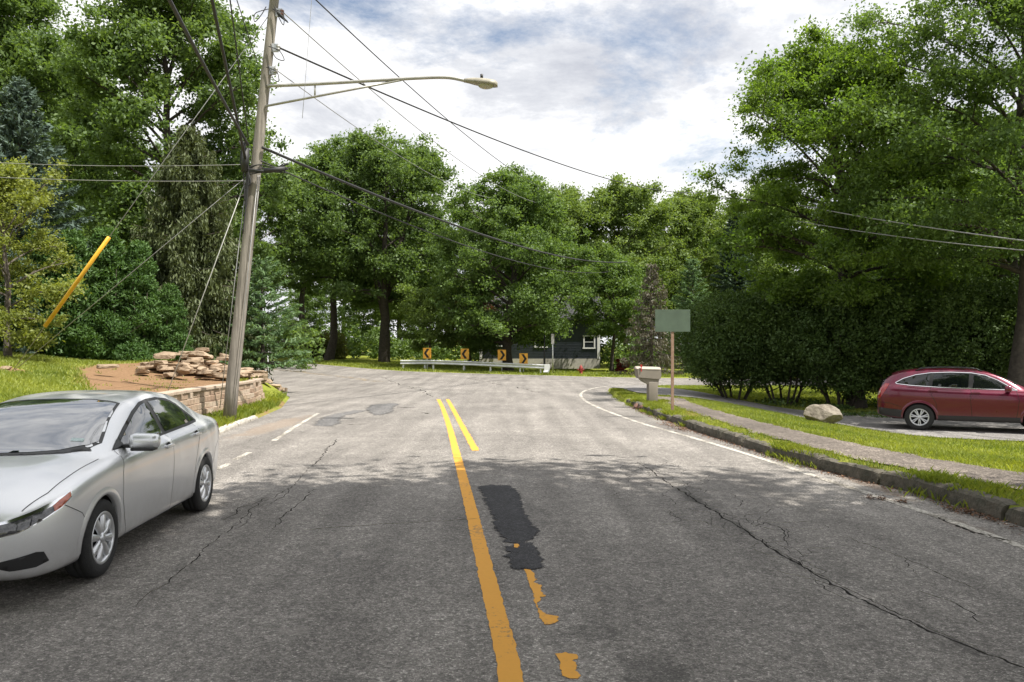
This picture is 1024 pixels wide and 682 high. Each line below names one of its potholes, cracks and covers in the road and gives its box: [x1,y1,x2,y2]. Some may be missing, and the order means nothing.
crack [591,462,1024,668]
crack [137,424,359,604]
